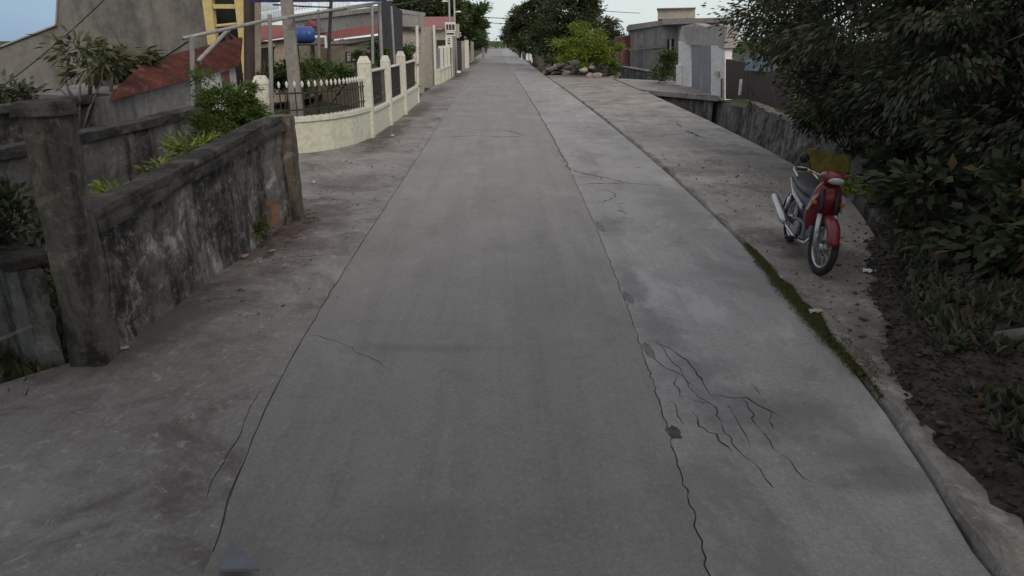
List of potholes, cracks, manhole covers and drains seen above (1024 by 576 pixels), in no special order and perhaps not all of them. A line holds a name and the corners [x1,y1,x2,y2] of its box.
crack [647,340,809,487]
crack [573,167,658,214]
crack [206,393,259,499]
pothole [665,425,682,439]
